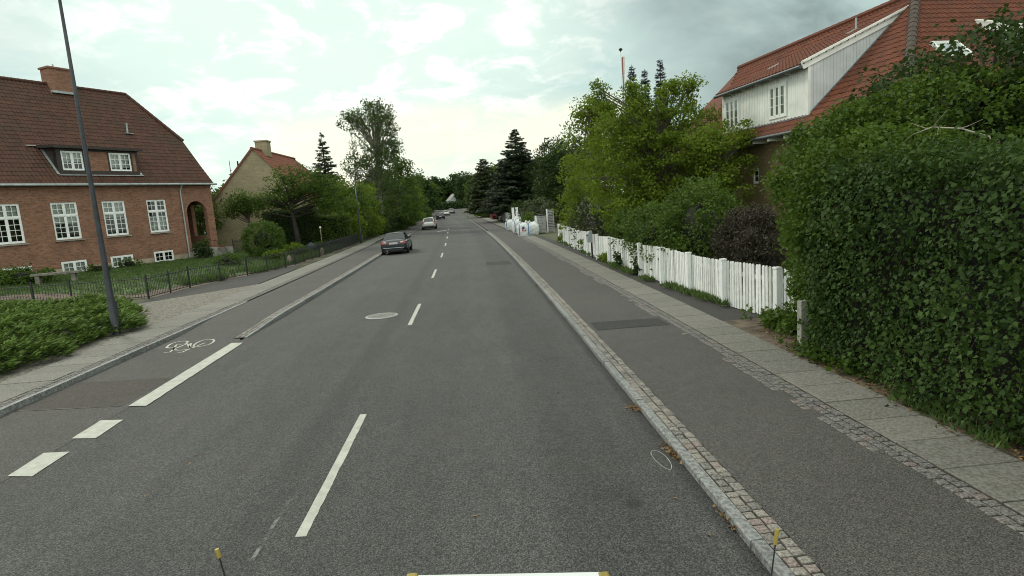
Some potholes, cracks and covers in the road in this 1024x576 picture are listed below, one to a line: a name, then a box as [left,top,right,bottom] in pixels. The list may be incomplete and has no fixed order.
manhole cover [364,312,400,320]
